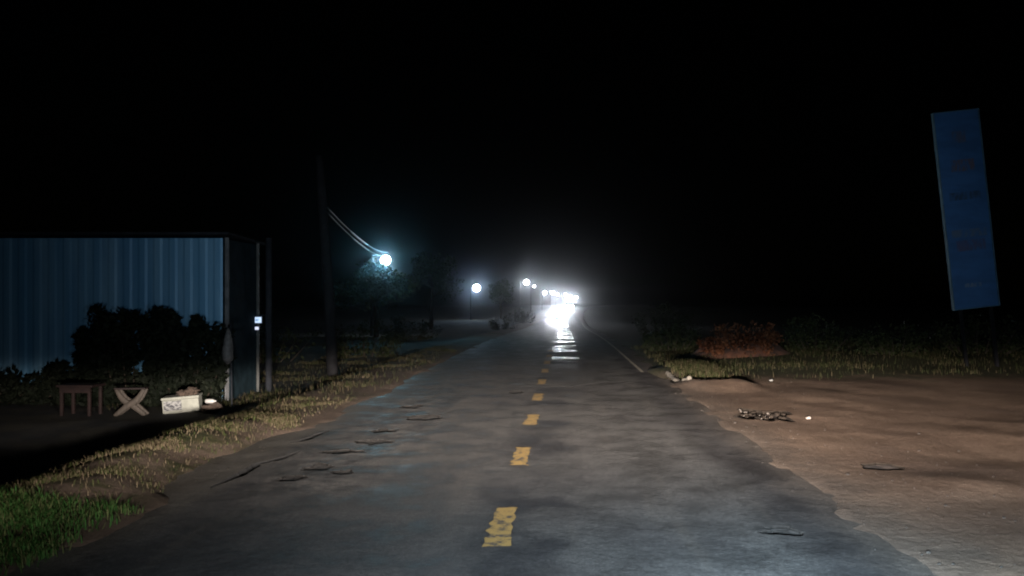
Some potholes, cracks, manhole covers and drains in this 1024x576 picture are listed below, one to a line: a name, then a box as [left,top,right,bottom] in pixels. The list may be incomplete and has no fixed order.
pothole [302,463,334,471]
pothole [861,463,905,471]
crack [210,431,328,488]
pothole [758,526,806,536]
